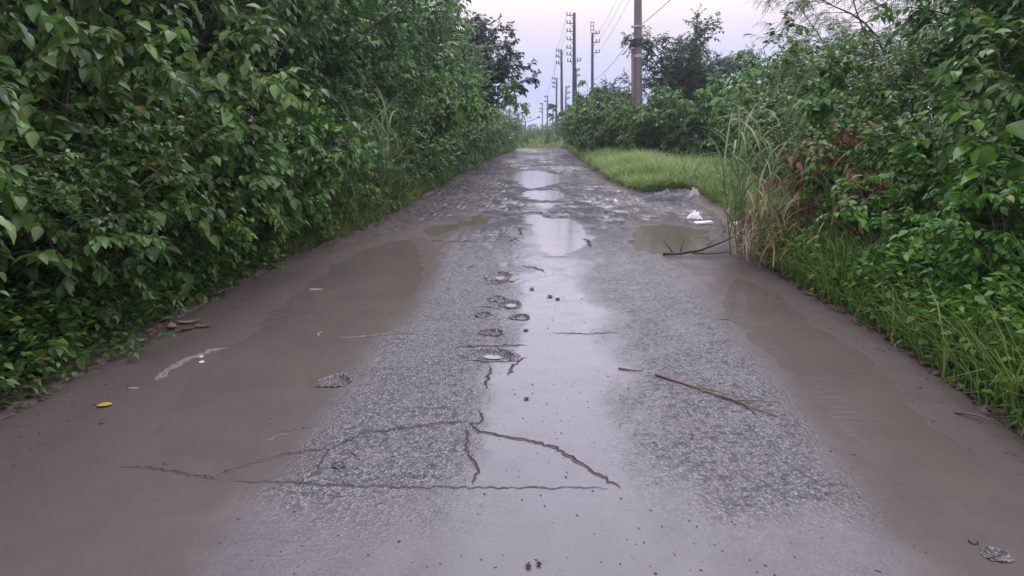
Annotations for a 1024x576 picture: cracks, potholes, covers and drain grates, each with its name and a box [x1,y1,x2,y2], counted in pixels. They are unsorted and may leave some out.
crack [468,265,544,285]
crack [456,344,528,388]
pothole [457,347,520,362]
pothole [478,328,505,336]
pothole [498,299,522,309]
pothole [484,270,513,281]
crack [129,411,620,487]
pothole [487,294,506,302]
